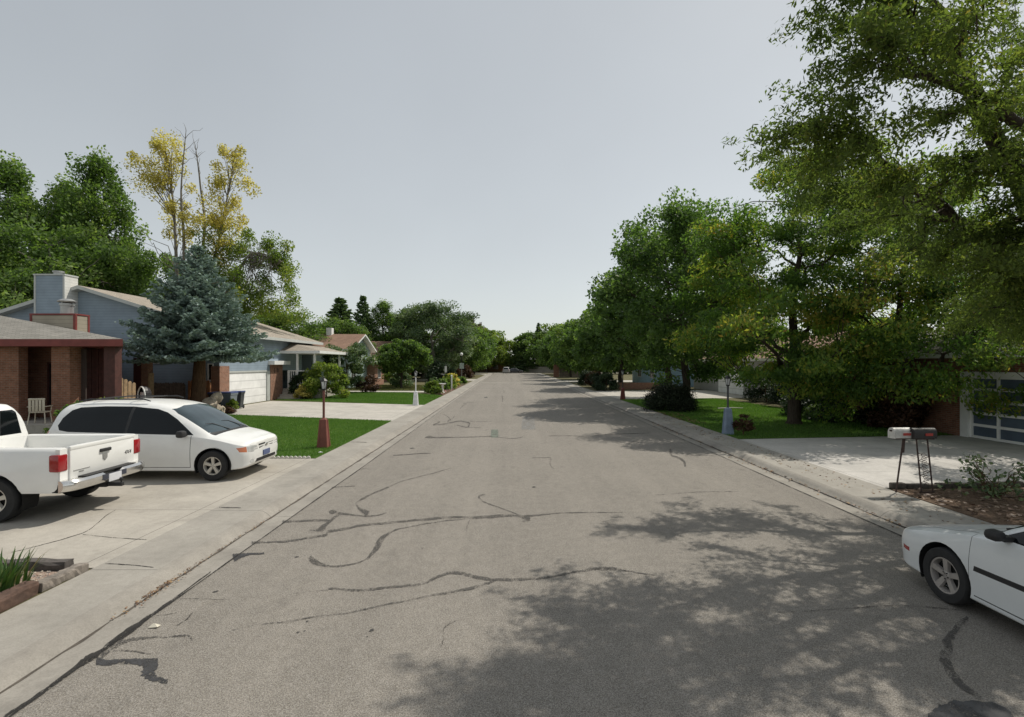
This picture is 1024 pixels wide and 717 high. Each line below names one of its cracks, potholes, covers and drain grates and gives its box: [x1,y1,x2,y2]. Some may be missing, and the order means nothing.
crack [18,510,146,551]
